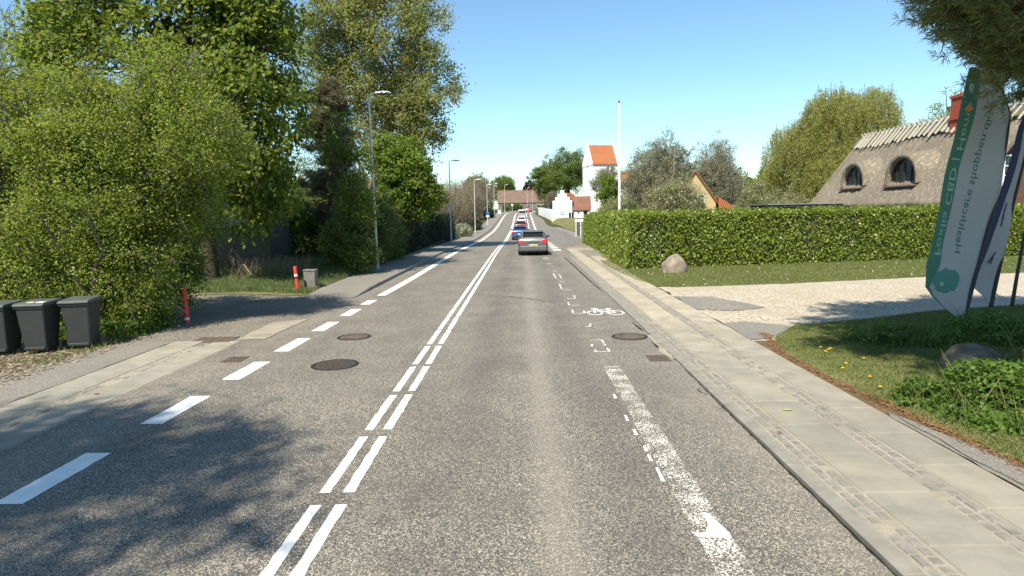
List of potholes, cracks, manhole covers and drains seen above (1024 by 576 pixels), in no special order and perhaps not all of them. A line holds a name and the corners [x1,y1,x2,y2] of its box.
manhole cover [311,359,359,371]
